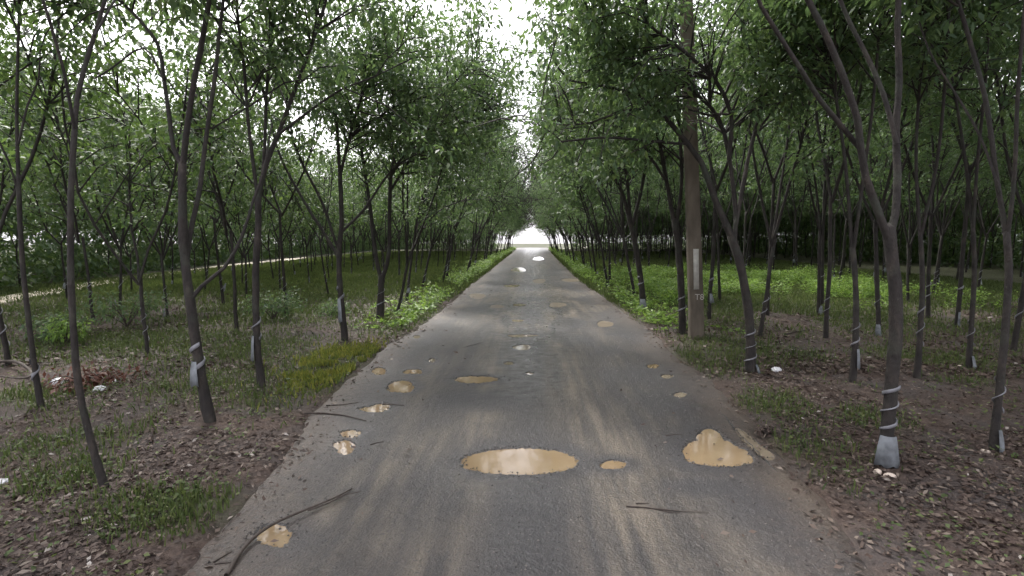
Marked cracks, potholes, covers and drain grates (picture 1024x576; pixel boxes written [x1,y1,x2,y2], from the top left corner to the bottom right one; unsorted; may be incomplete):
pothole [339,429,362,438]
pothole [358,402,391,412]
pothole [599,459,627,469]
pothole [453,375,501,383]
pothole [332,439,357,455]
pothole [385,379,416,393]
pothole [253,521,294,548]
pothole [459,445,581,475]
pothole [681,427,755,467]
